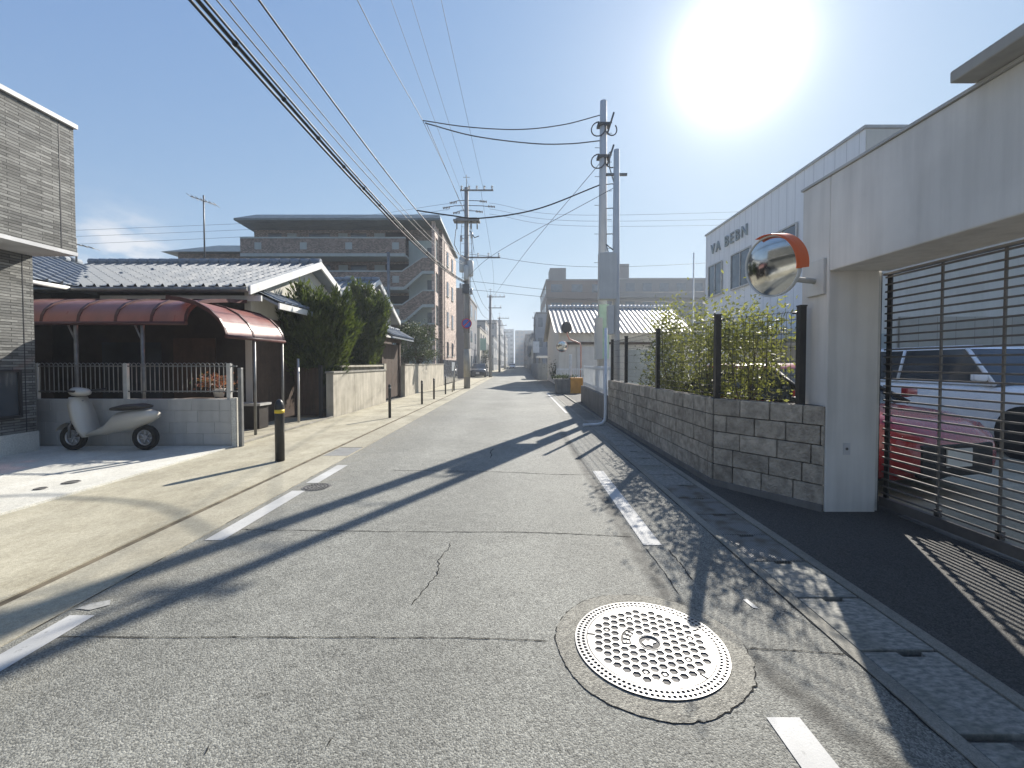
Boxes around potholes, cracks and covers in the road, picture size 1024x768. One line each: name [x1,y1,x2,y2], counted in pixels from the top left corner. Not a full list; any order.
manhole cover [554,594,758,724]
utility cover [302,483,332,491]
crack [412,543,451,604]
